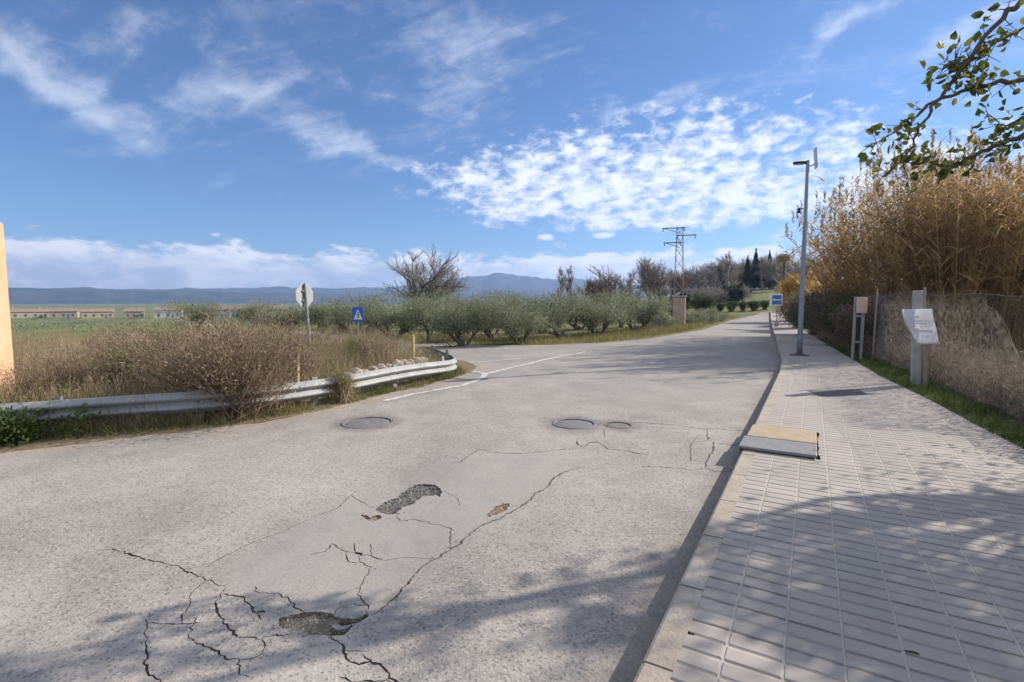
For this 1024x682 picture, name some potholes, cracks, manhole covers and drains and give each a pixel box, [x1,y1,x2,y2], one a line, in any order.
manhole cover [552,418,597,429]
crack [451,422,746,472]
crack [98,492,375,682]
pothole [278,611,368,637]
pothole [376,484,442,514]
manhole cover [604,421,632,429]
crack [331,637,399,682]
manhole cover [341,416,394,429]
